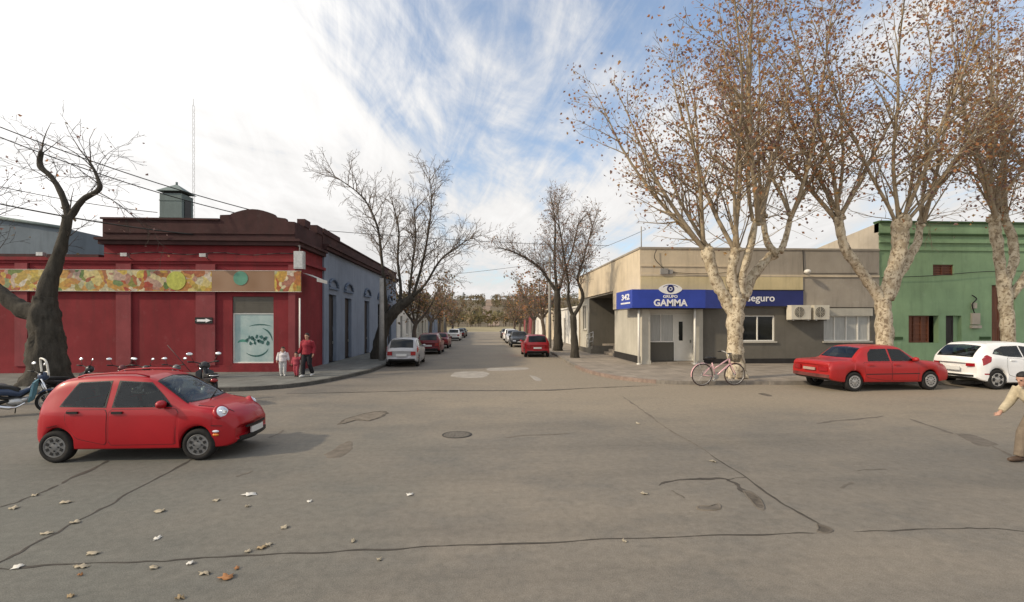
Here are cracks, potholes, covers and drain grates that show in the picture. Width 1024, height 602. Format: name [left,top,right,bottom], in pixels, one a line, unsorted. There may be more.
crack [0,451,820,569]
crack [816,416,882,424]
